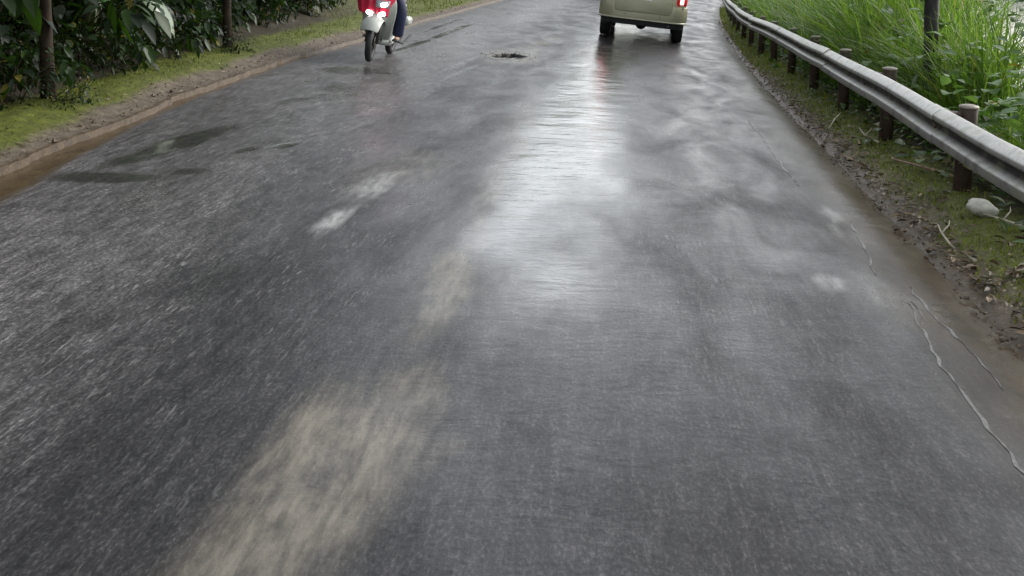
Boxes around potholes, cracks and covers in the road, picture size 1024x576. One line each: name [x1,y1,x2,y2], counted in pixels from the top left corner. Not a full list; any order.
crack [850,221,876,275]
crack [749,122,798,185]
pothole [480,51,539,60]
crack [907,289,1024,474]
